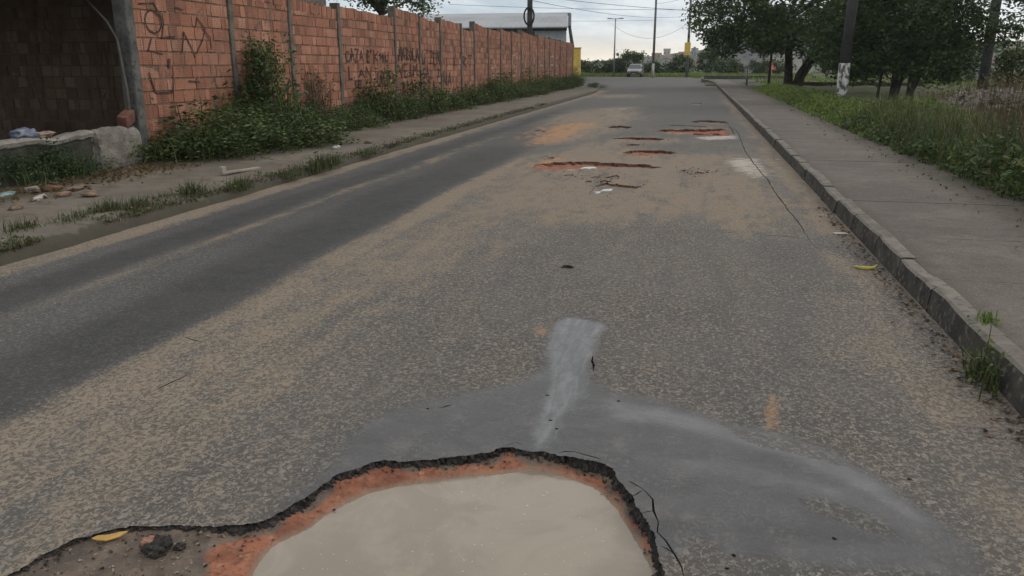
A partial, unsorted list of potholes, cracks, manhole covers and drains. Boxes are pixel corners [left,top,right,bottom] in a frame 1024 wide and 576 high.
crack [629,481,684,576]
pothole [532,161,662,171]
pothole [7,447,666,576]
